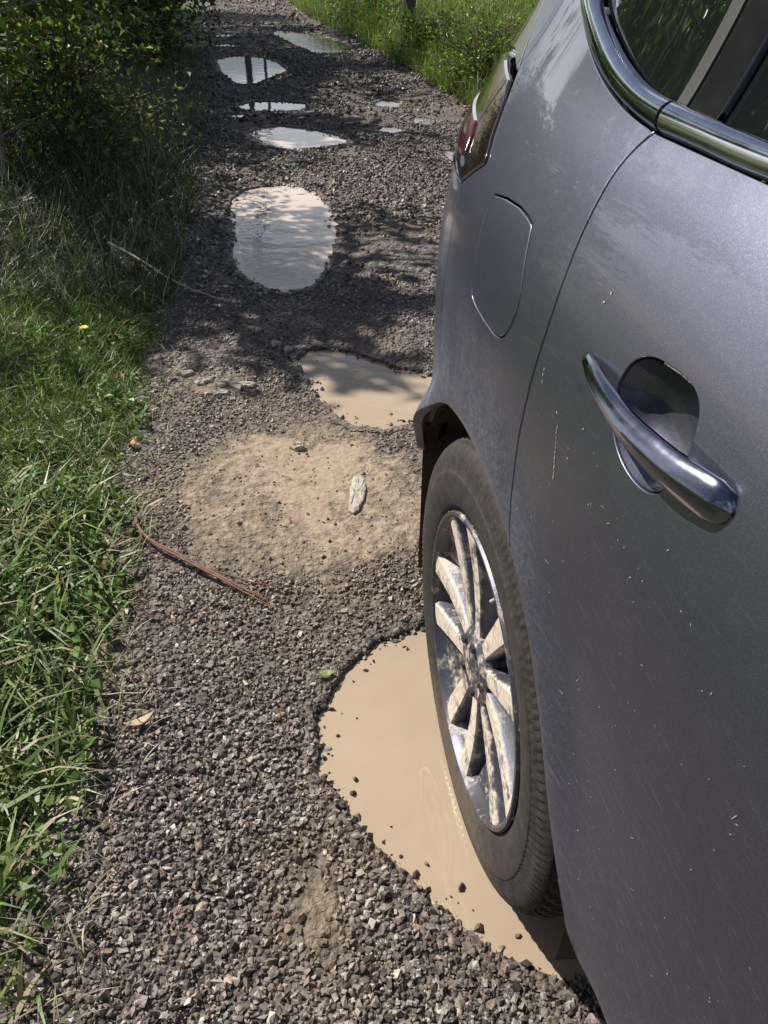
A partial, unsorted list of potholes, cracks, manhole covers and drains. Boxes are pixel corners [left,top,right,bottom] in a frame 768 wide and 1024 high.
pothole [219,181,348,296]
pothole [233,99,314,112]
pothole [297,610,597,1007]
pothole [371,124,409,134]
pothole [210,54,292,84]
pothole [289,345,433,434]
pothole [241,123,354,150]
pothole [269,29,354,53]
pothole [367,98,412,108]
